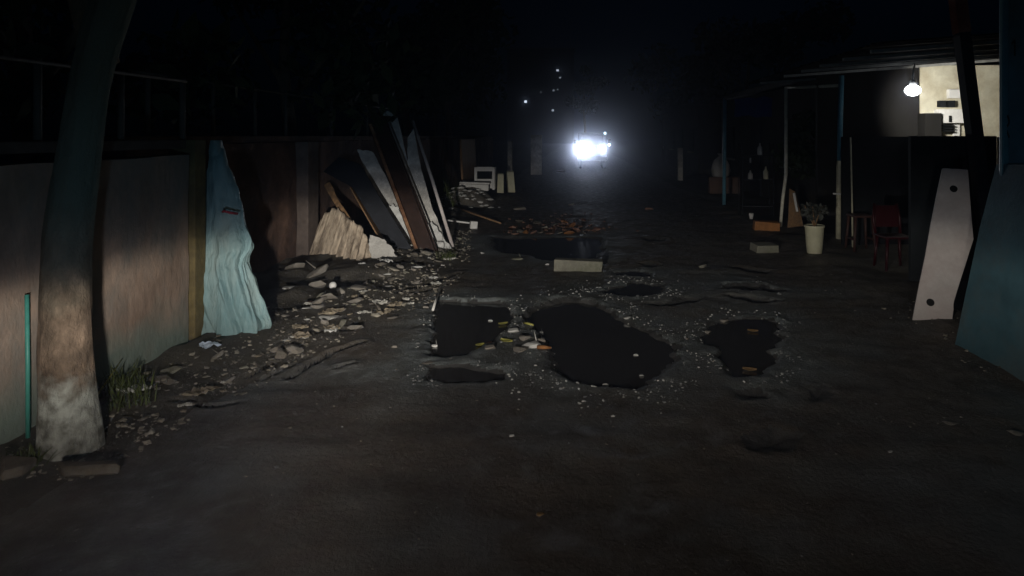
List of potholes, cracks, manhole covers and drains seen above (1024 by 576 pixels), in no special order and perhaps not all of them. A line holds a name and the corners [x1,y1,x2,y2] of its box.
pothole [519,297,683,390]
pothole [728,294,779,303]
pothole [429,299,517,358]
pothole [699,316,787,377]
pothole [423,363,506,383]
pothole [720,282,787,292]
pothole [488,236,607,261]
pothole [598,281,668,297]
